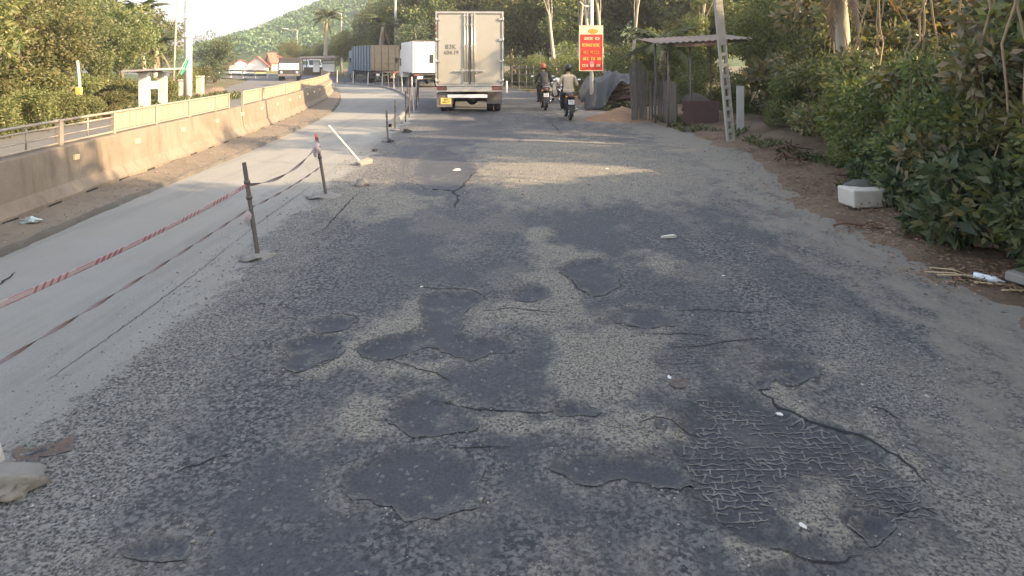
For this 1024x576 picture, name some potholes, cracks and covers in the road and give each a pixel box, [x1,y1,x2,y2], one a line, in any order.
crack [638,390,938,530]
crack [451,172,477,208]
